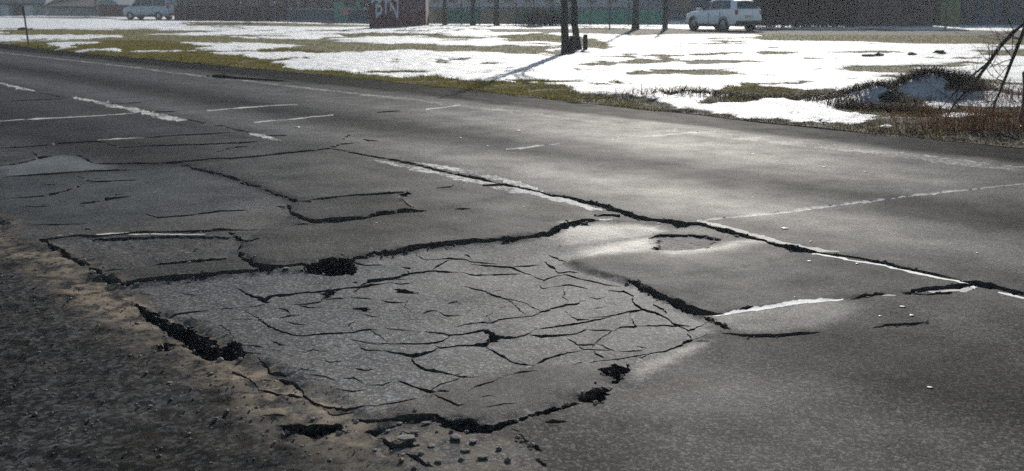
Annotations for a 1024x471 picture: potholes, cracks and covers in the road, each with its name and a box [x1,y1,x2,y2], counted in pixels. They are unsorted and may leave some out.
crack [330,148,1024,299]
crack [275,198,426,225]
pothole [280,423,350,439]
crack [0,169,133,208]
pothole [133,303,246,362]
pothole [300,256,358,276]
crack [39,239,259,287]
crack [145,210,246,218]
pothole [577,387,613,404]
crack [627,278,843,338]
pothole [597,364,631,385]
crack [180,164,411,203]
